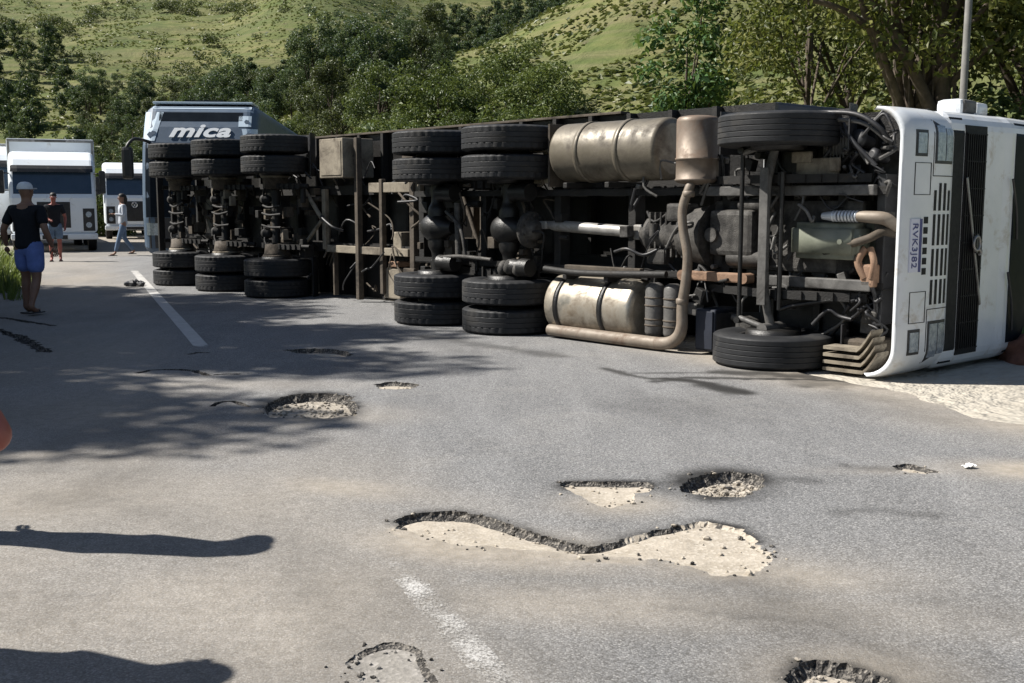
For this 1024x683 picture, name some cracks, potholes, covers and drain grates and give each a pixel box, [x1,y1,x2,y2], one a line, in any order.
pothole [385,510,788,576]
pothole [373,381,423,389]
crack [0,317,57,353]
pothole [669,470,765,499]
pothole [255,393,359,419]
pothole [893,464,941,474]
pothole [777,657,891,683]
pothole [557,479,659,508]
pothole [324,642,443,683]
crack [137,352,240,376]
pothole [283,348,355,357]
